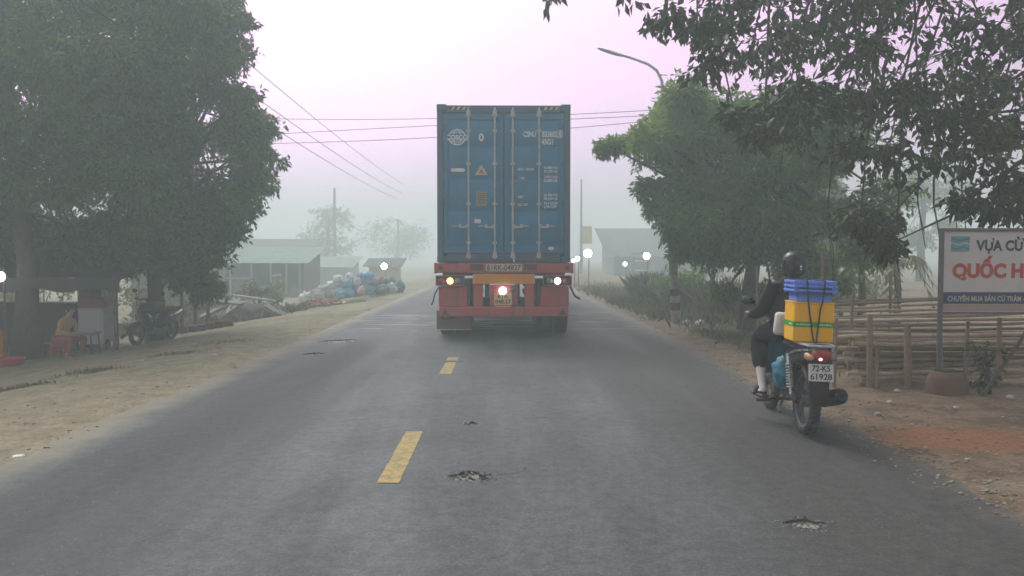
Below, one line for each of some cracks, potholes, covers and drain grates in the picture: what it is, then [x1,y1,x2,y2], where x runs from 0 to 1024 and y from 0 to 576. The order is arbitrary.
pothole [441,469,497,484]
pothole [764,516,834,532]
